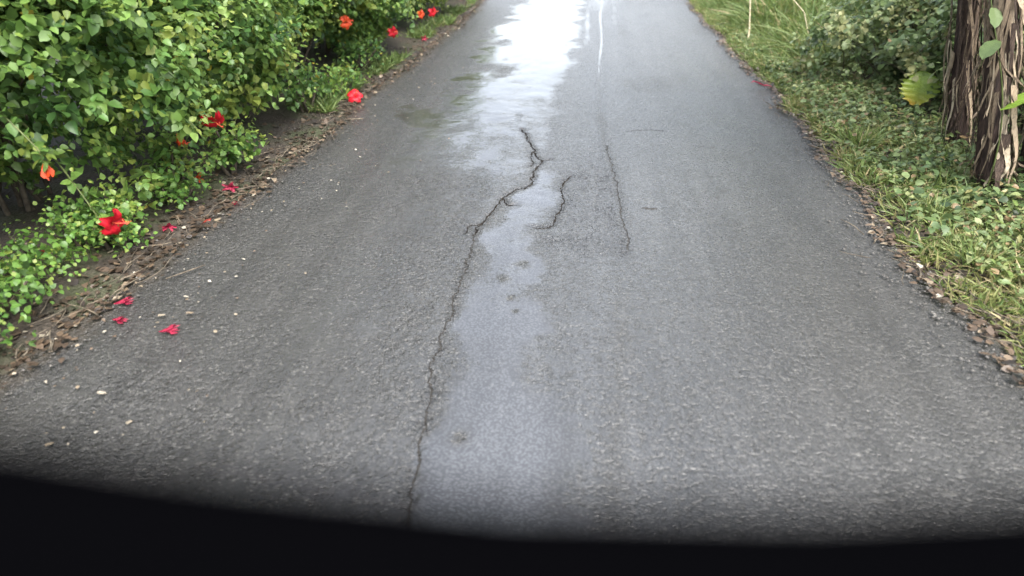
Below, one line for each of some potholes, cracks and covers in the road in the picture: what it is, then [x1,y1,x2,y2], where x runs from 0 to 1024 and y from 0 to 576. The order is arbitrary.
crack [410,130,572,489]
crack [606,146,657,250]
